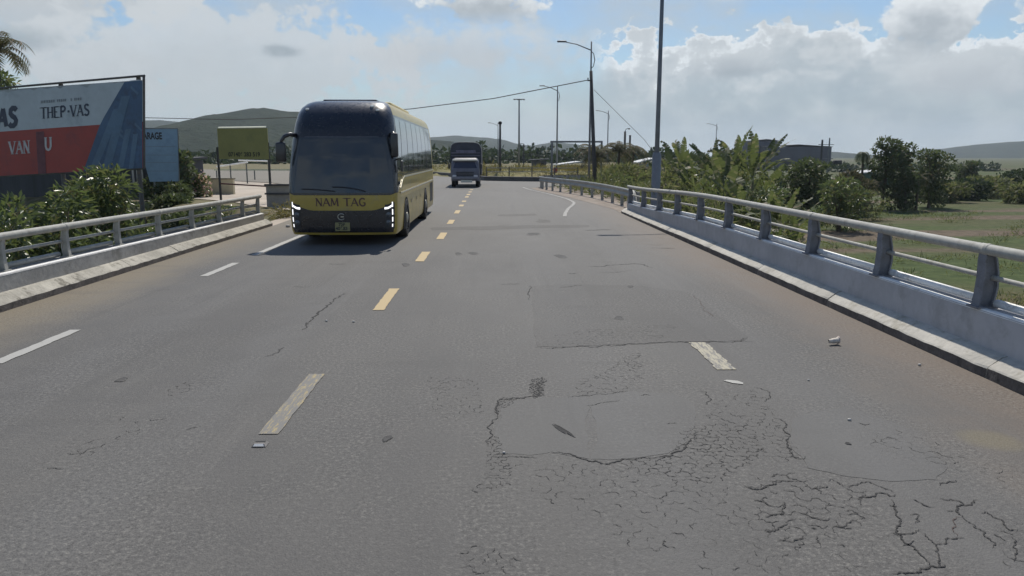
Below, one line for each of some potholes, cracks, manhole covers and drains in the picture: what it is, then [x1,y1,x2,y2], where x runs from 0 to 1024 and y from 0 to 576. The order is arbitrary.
crack [540,324,754,406]
crack [46,417,164,469]
crack [515,387,1021,574]
crack [464,545,521,574]
